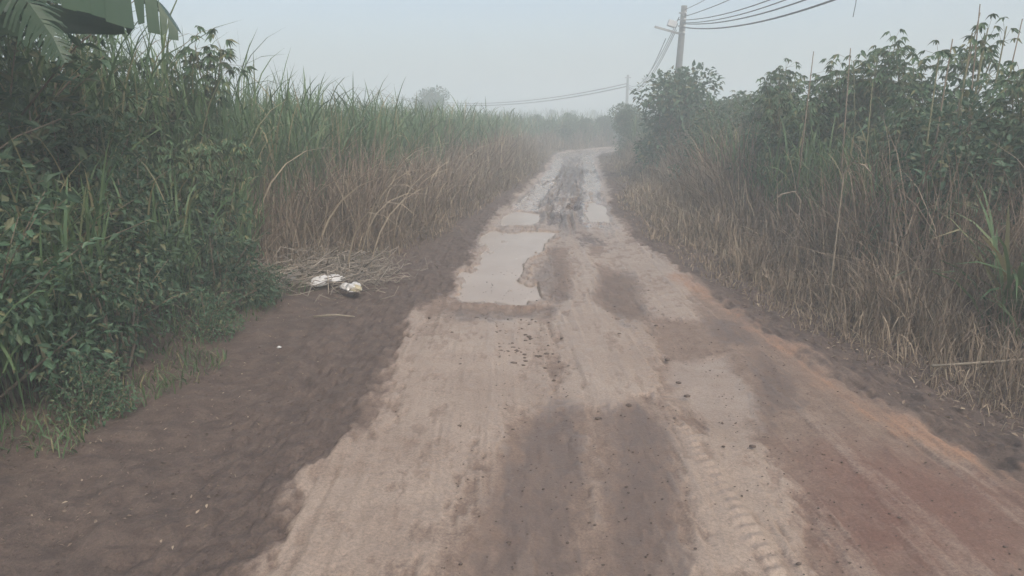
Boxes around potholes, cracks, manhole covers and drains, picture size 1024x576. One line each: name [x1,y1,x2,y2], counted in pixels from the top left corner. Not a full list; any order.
pothole [579,200,619,223]
pothole [493,208,548,226]
pothole [420,227,564,308]
pothole [563,196,588,212]
